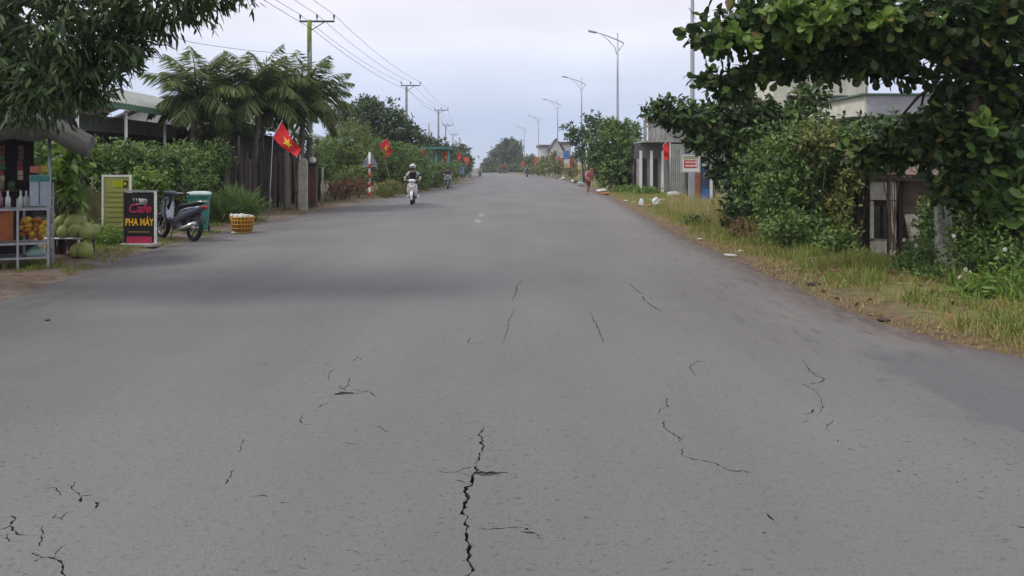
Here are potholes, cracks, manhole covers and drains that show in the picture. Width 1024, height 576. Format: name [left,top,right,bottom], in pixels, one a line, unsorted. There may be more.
crack [299,357,375,425]
crack [802,361,855,451]
crack [436,428,540,576]
crack [0,482,99,576]
crack [659,398,748,473]
